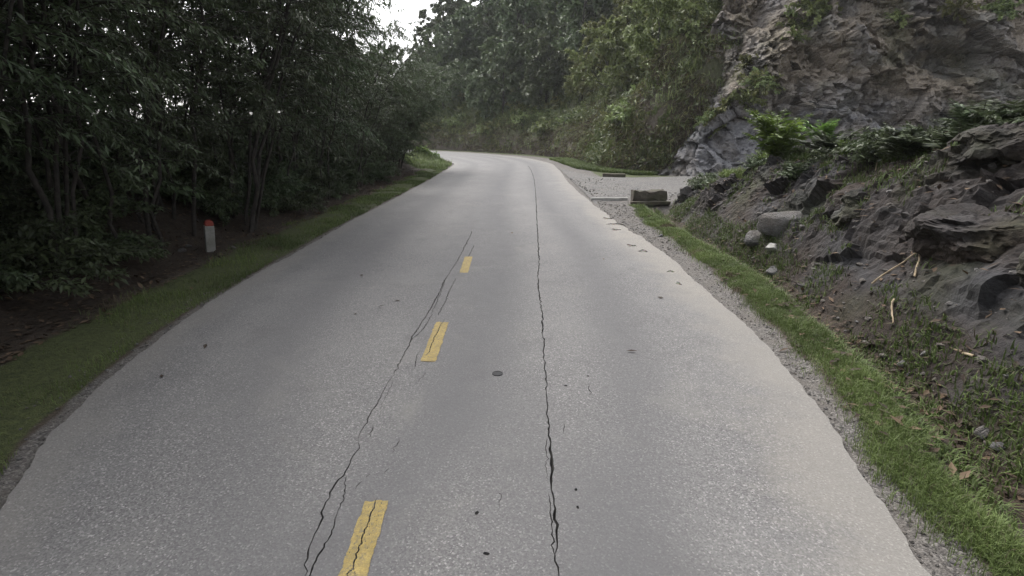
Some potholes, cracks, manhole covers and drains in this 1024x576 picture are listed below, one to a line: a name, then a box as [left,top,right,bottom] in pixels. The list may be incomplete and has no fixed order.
crack [528,166,565,576]
crack [304,231,474,576]
